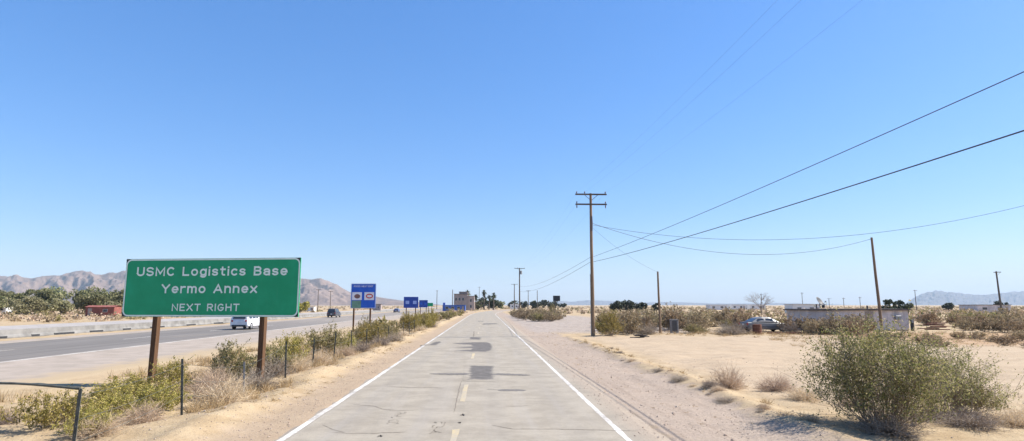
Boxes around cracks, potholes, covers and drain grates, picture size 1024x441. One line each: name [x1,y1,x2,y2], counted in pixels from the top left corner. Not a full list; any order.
crack [324,404,404,434]
